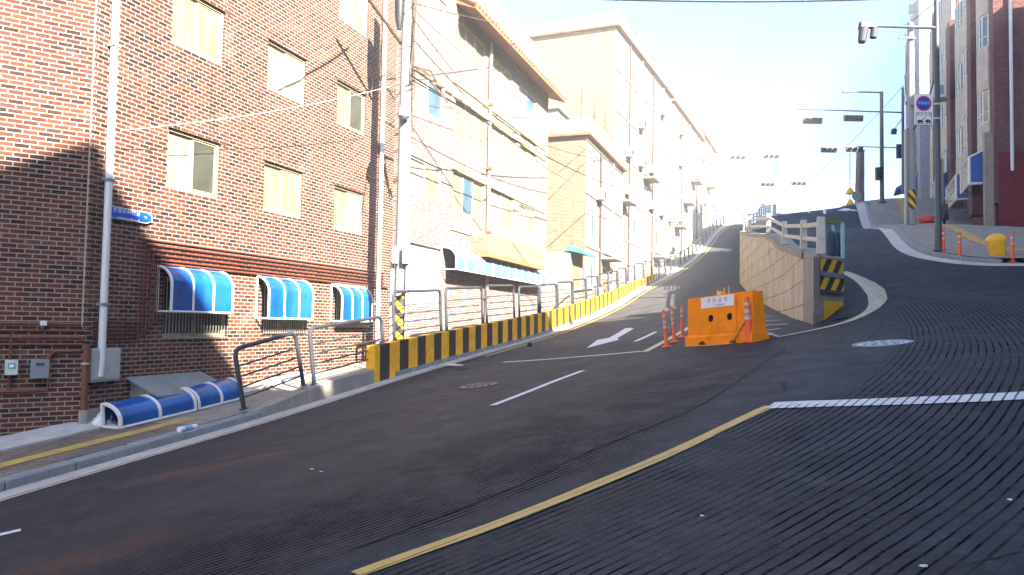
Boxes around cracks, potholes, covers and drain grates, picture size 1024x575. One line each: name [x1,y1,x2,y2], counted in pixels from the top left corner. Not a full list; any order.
manhole cover [459,381,499,389]
manhole cover [852,339,914,347]
